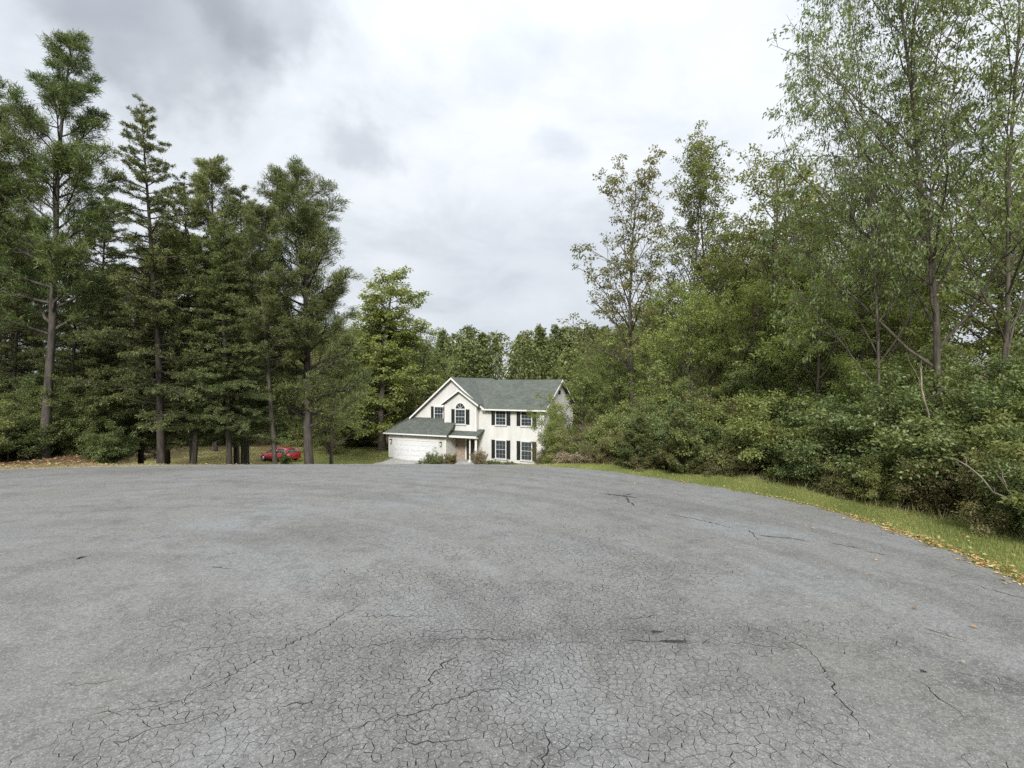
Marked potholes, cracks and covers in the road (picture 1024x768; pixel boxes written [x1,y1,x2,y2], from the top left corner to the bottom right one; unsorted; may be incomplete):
crack [4,515,1019,768]
